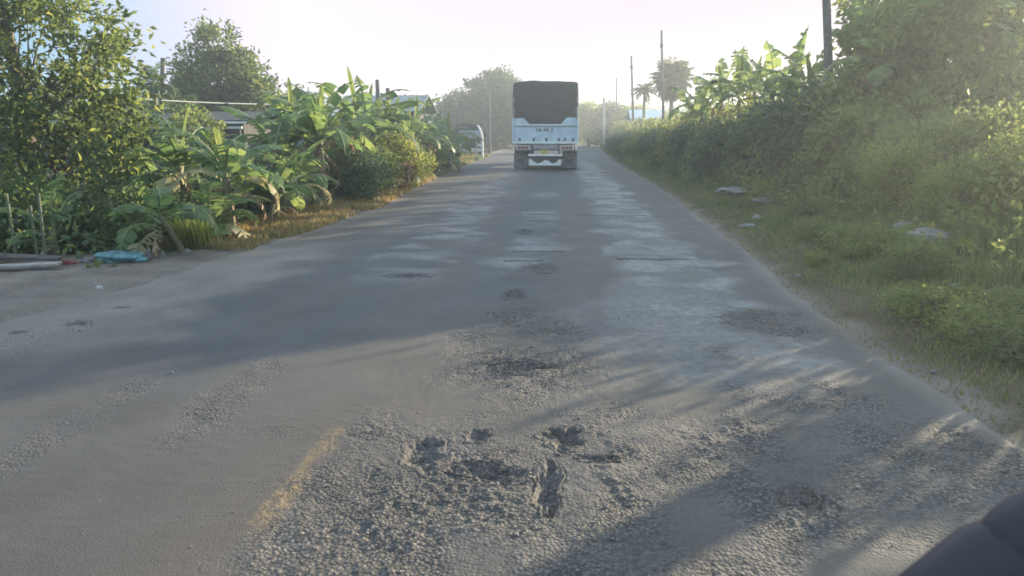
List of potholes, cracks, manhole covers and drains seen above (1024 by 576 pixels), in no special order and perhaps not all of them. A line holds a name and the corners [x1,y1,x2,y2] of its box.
pothole [397,433,455,479]
pothole [438,458,532,487]
pothole [521,262,559,274]
pothole [501,289,527,302]
pothole [529,456,566,522]
pothole [485,359,564,376]
pothole [534,424,587,457]
pothole [572,454,623,464]
pothole [463,428,494,444]
pothole [59,319,92,327]
